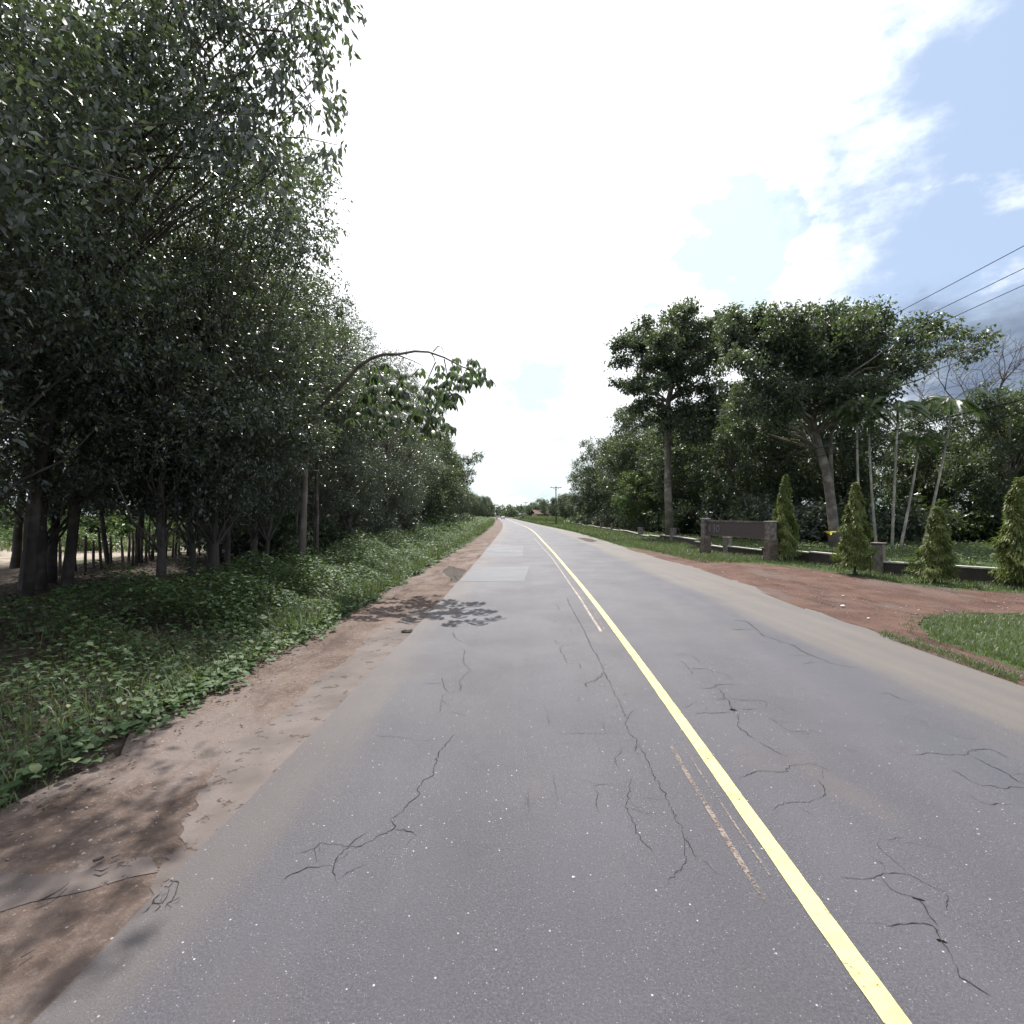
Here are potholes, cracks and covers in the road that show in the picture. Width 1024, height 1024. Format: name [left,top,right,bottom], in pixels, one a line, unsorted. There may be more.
crack [682,659,786,756]
crack [844,837,990,995]
crack [895,696,1021,805]
crack [285,735,454,881]
crack [555,599,711,880]
crack [737,754,832,837]
